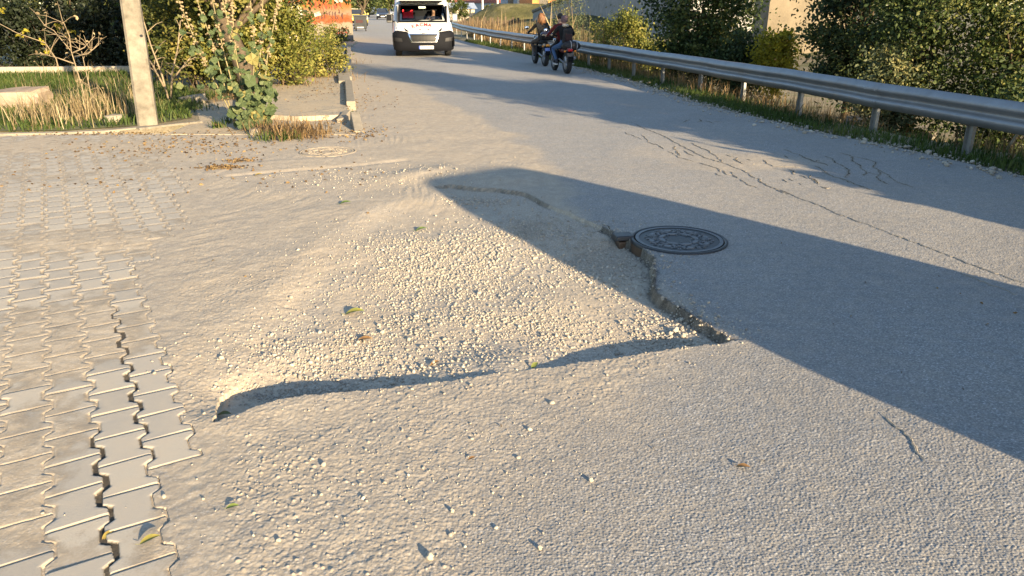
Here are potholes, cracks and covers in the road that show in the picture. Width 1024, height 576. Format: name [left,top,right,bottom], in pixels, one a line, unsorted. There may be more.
crack [882,413,925,462]
crack [625,132,913,194]
manhole cover [611,226,728,257]
manhole cover [299,146,356,157]
